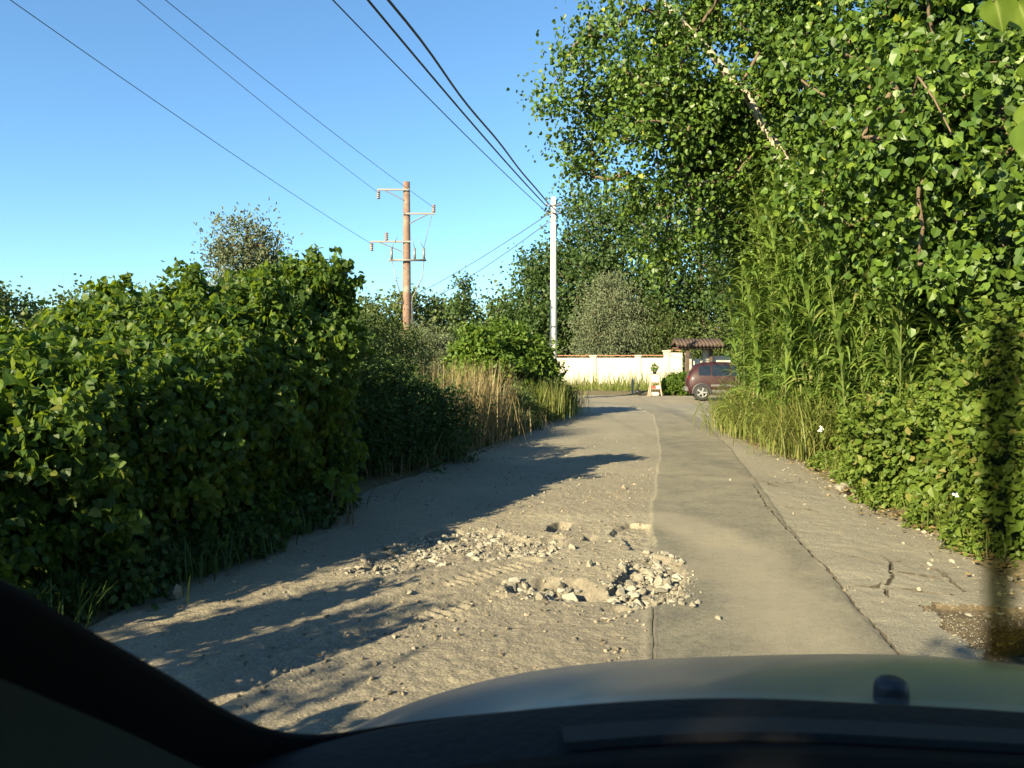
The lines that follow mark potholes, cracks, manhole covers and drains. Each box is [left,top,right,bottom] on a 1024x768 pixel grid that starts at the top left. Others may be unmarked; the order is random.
pothole [504,577,609,603]
pothole [606,554,688,608]
pothole [345,529,566,576]
pothole [544,521,573,533]
pothole [920,602,1024,665]
crack [736,473,967,655]
